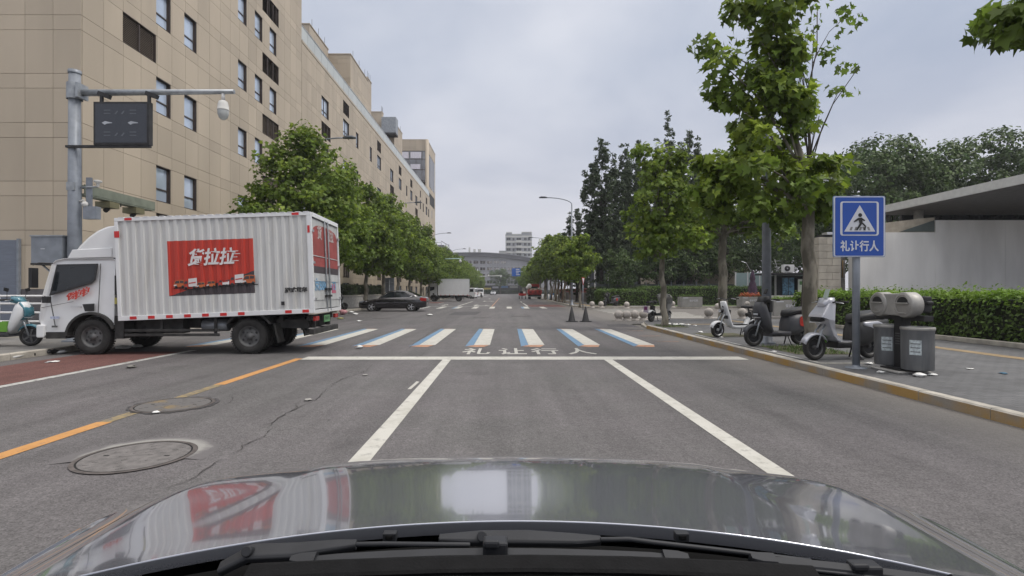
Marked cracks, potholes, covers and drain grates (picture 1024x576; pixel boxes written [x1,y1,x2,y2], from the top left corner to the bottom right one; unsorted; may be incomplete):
manhole cover [48,436,219,474]
manhole cover [126,396,220,414]
crack [177,371,364,484]
